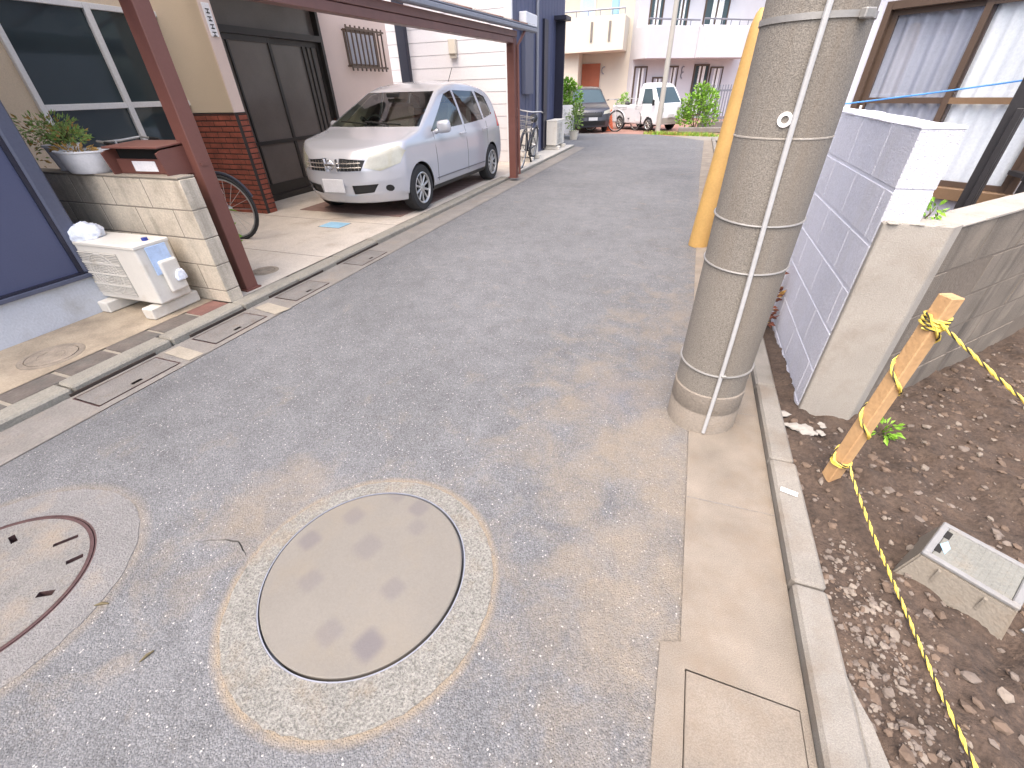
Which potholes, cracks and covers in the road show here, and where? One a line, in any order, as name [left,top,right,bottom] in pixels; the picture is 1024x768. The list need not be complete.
manhole cover [16,343,85,370]
manhole cover [0,489,140,688]
manhole cover [219,482,493,740]
crack [202,539,246,555]
manhole cover [253,266,279,275]
